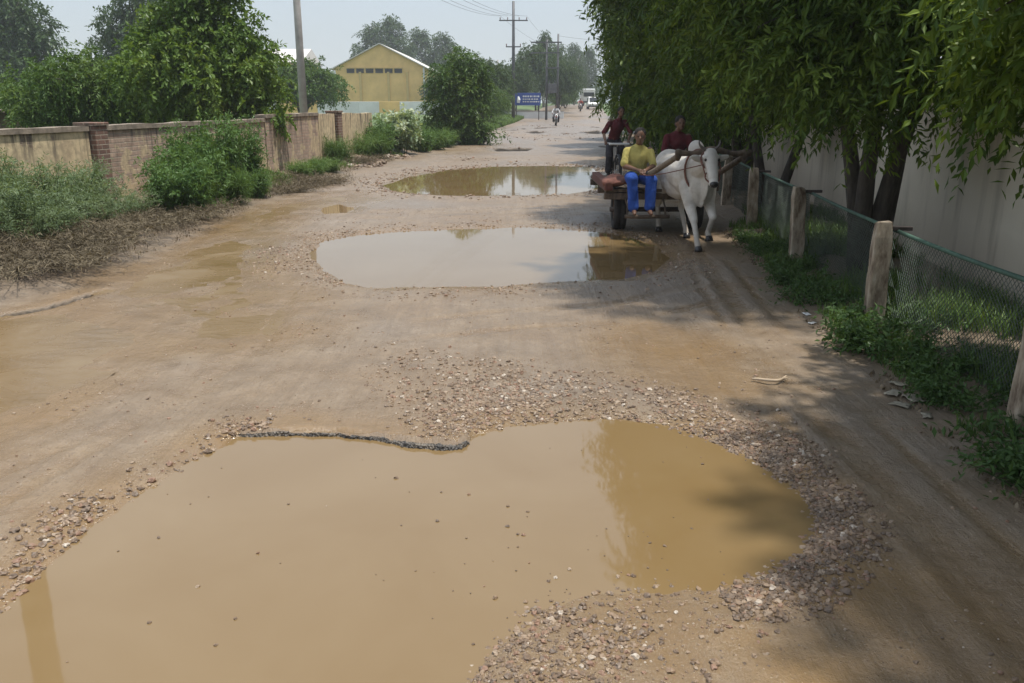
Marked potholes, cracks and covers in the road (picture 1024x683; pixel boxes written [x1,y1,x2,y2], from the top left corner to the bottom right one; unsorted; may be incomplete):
crack [0,287,123,321]
pothole [0,405,863,683]
pothole [315,203,365,214]
pothole [298,224,687,289]
pothole [379,165,607,196]
